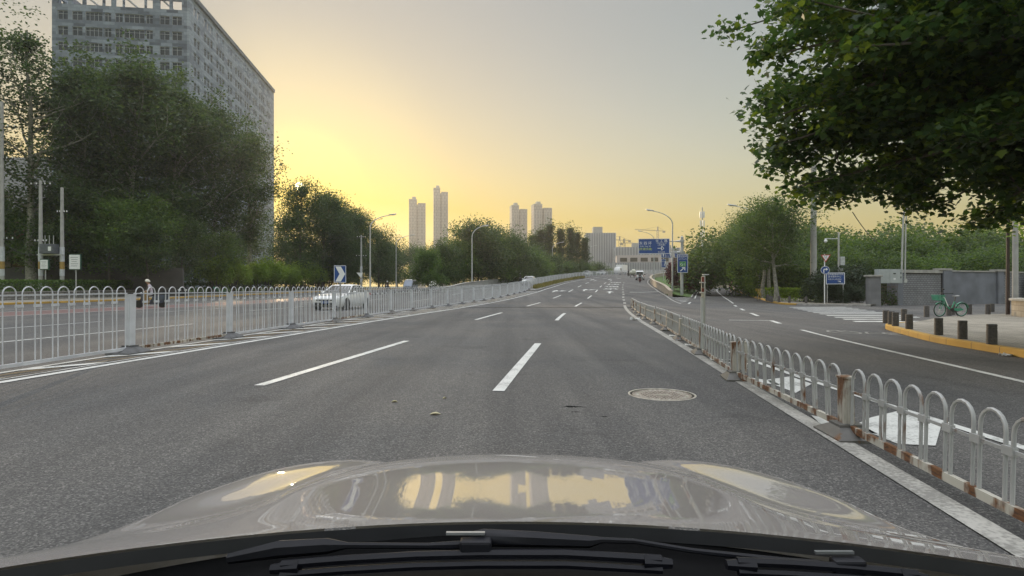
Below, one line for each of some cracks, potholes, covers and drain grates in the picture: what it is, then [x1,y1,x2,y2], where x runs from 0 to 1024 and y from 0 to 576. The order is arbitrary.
manhole cover [628,388,697,401]
